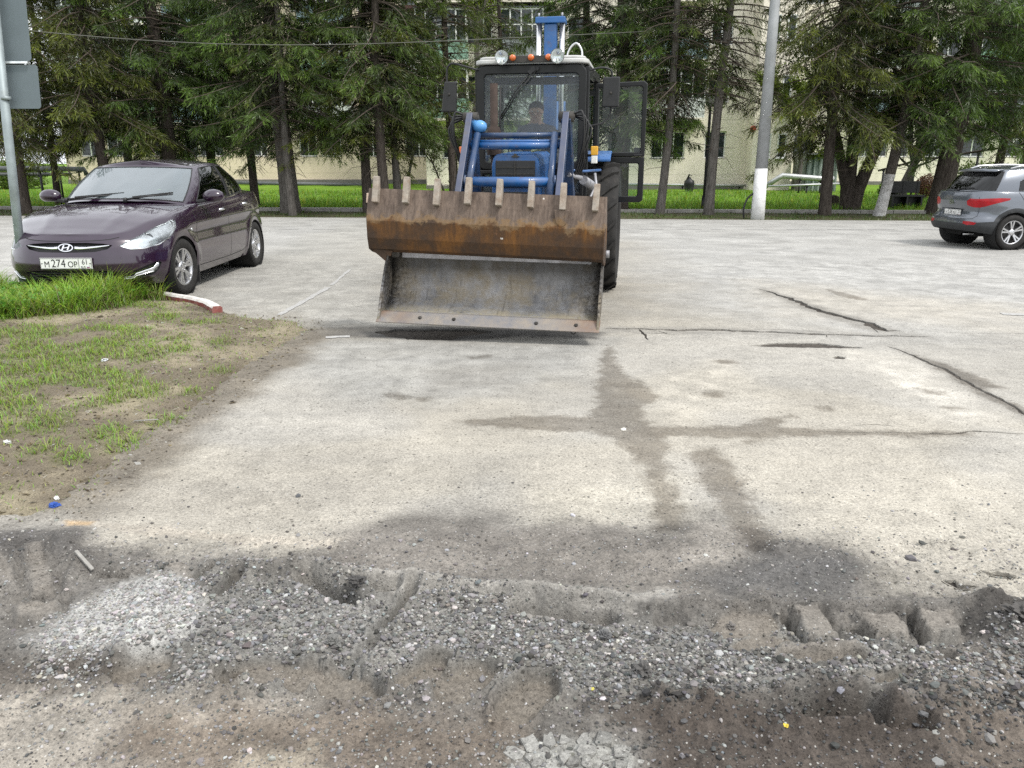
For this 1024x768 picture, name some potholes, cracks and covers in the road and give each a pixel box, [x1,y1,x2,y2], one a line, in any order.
crack [602,289,1024,435]
